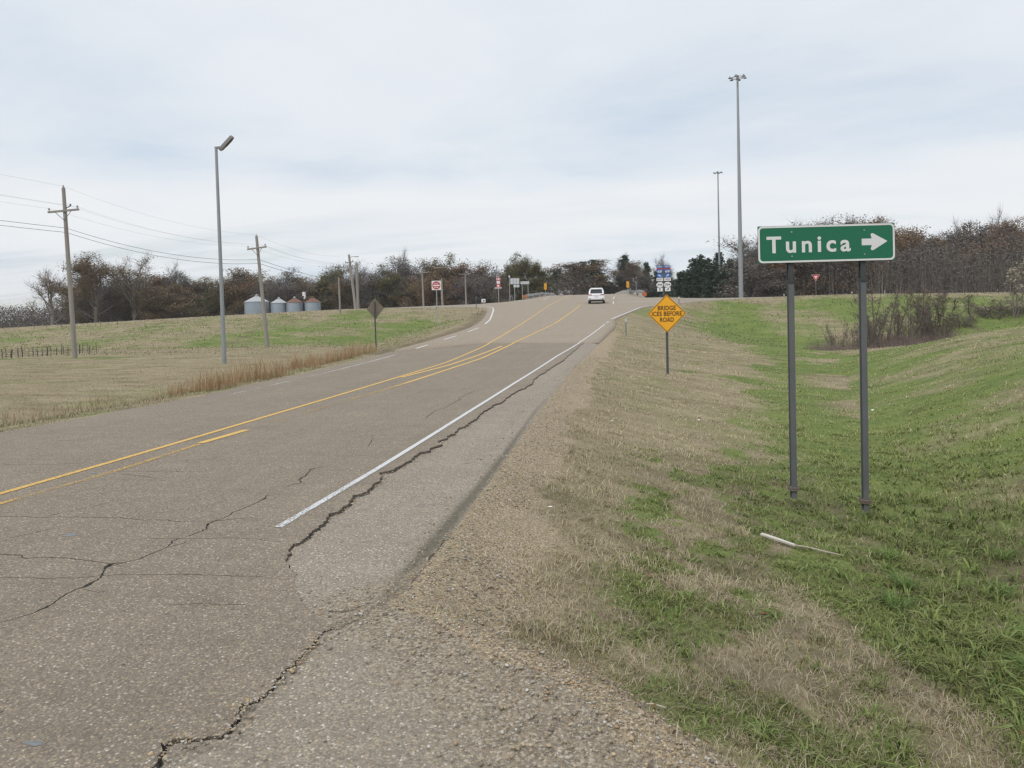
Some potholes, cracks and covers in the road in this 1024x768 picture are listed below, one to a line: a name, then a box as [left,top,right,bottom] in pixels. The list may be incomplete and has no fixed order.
crack [0,494,276,622]
crack [156,606,359,768]
crack [286,345,581,575]
